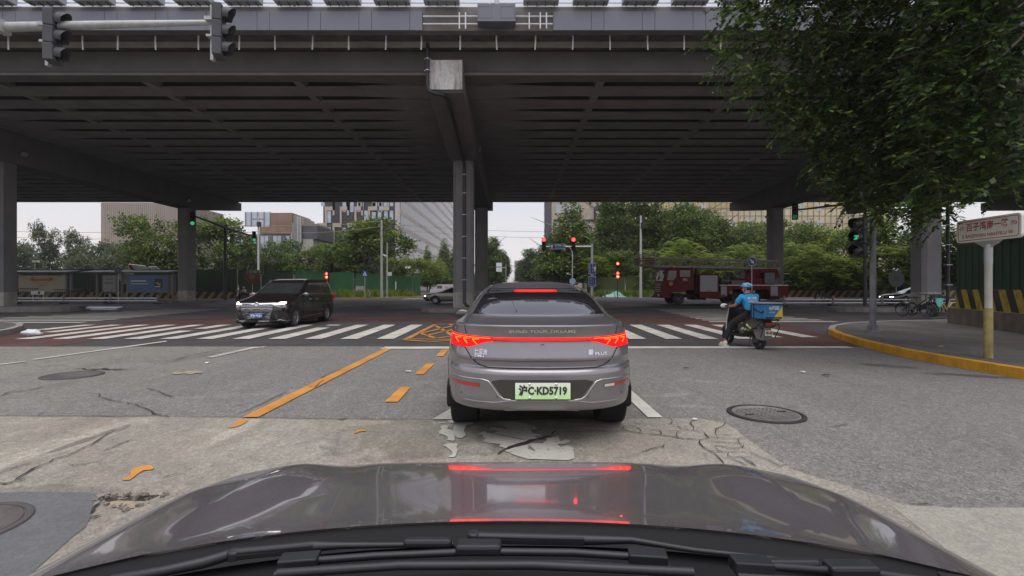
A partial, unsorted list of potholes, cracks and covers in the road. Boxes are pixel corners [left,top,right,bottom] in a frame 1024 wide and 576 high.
crack [489,419,619,454]
crack [0,388,173,484]
manhole cover [38,370,105,380]
manhole cover [726,404,807,424]
manhole cover [0,501,35,535]
pothole [93,490,169,512]
crack [623,418,786,466]
